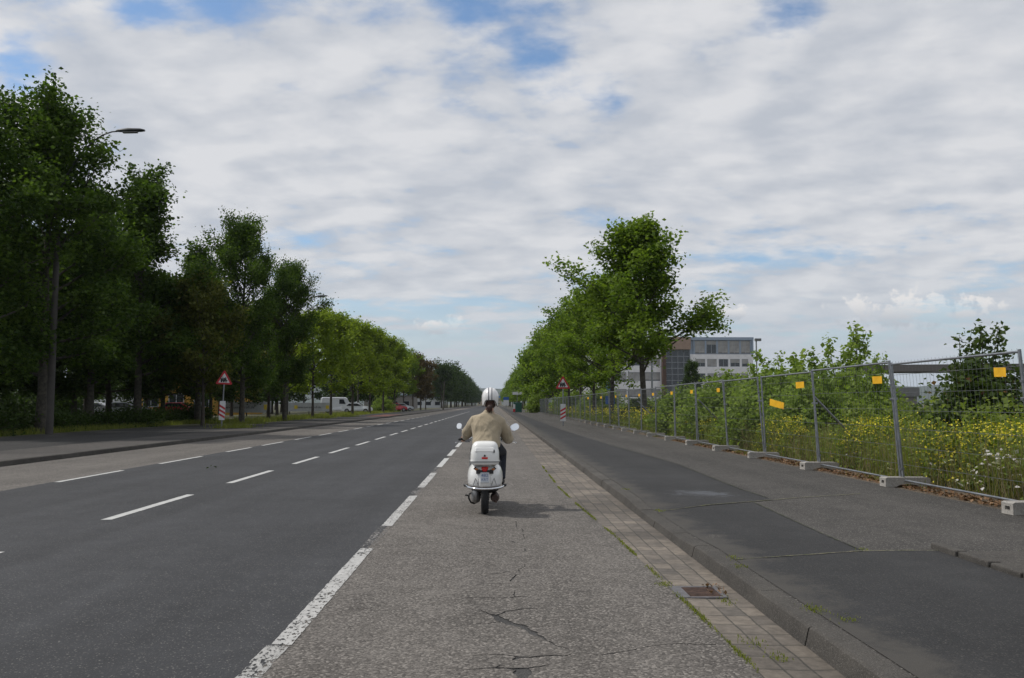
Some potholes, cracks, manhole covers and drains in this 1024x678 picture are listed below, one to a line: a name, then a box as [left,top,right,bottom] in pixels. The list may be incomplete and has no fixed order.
crack [464,521,716,678]
